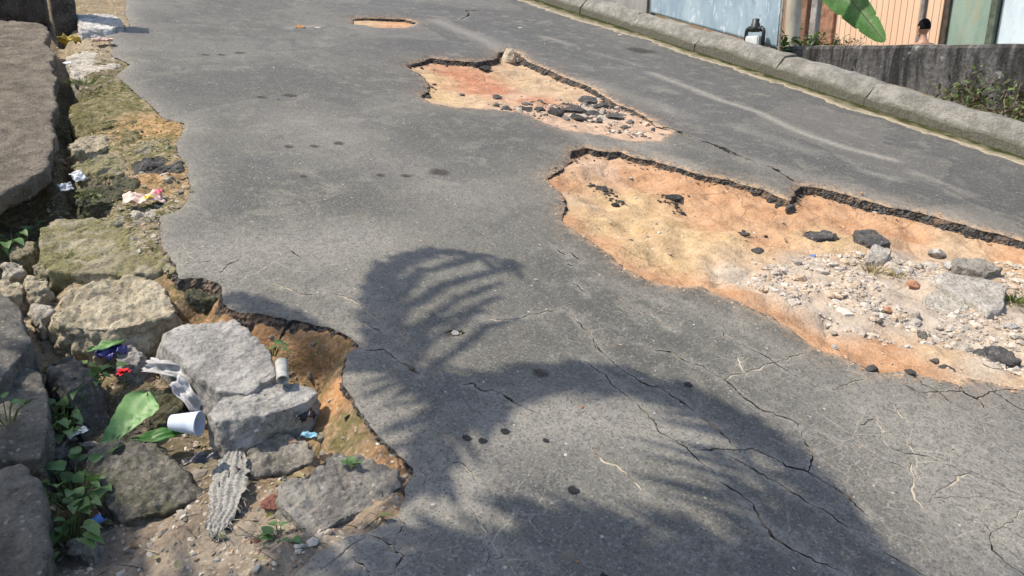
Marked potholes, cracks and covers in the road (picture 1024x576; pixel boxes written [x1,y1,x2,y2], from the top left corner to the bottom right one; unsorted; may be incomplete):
crack [486,283,925,576]
pothole [549,153,1024,389]
crack [663,127,794,182]
crack [373,350,420,375]
crack [462,383,541,414]
crack [857,377,1024,575]
pothole [411,57,671,141]
crack [320,525,405,576]
crack [470,508,520,576]
